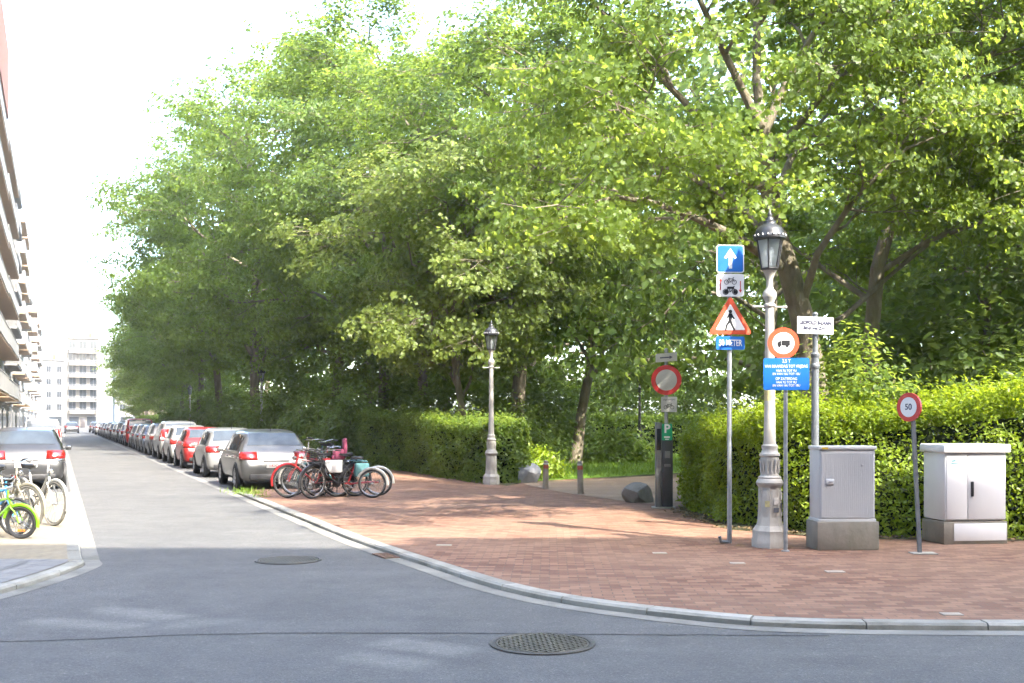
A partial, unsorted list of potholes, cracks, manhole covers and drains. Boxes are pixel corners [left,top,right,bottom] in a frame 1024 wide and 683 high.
manhole cover [254,555,322,565]
manhole cover [490,632,595,655]
